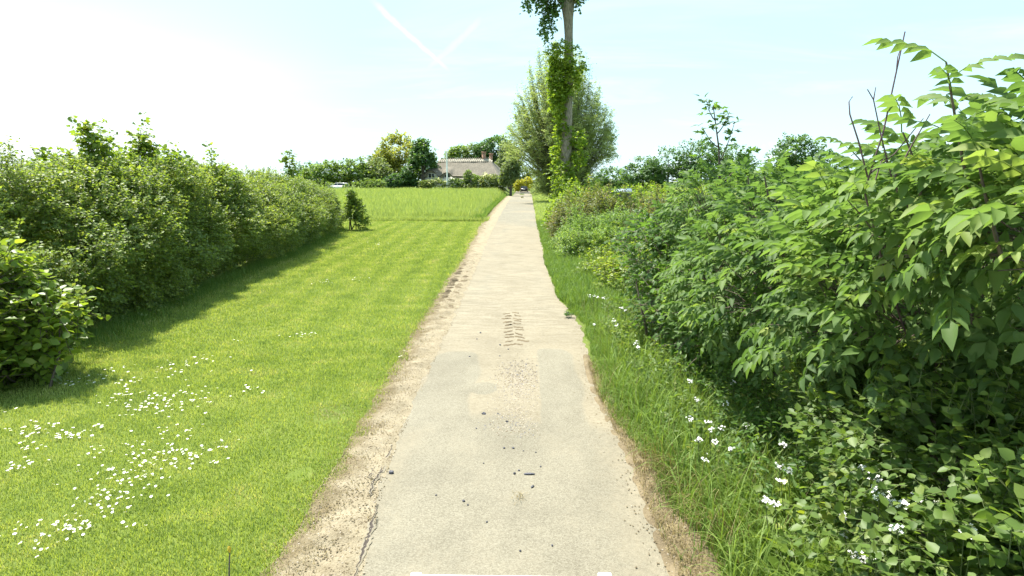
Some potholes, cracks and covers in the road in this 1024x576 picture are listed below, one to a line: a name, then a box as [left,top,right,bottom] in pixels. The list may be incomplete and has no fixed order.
crack [354,445,393,576]
